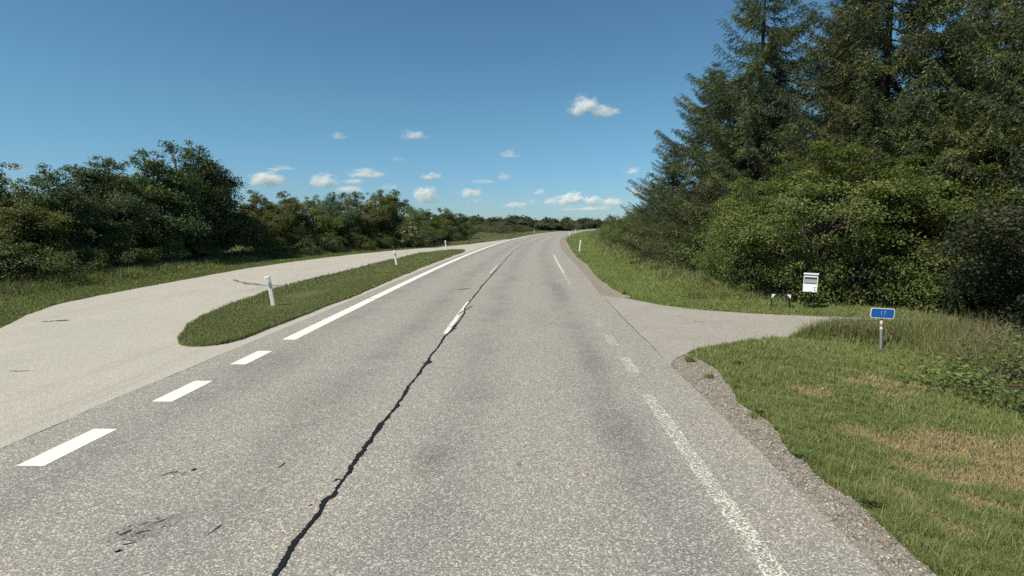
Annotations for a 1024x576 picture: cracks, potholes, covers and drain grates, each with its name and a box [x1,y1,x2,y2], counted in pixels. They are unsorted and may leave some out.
crack [272,243,526,576]
